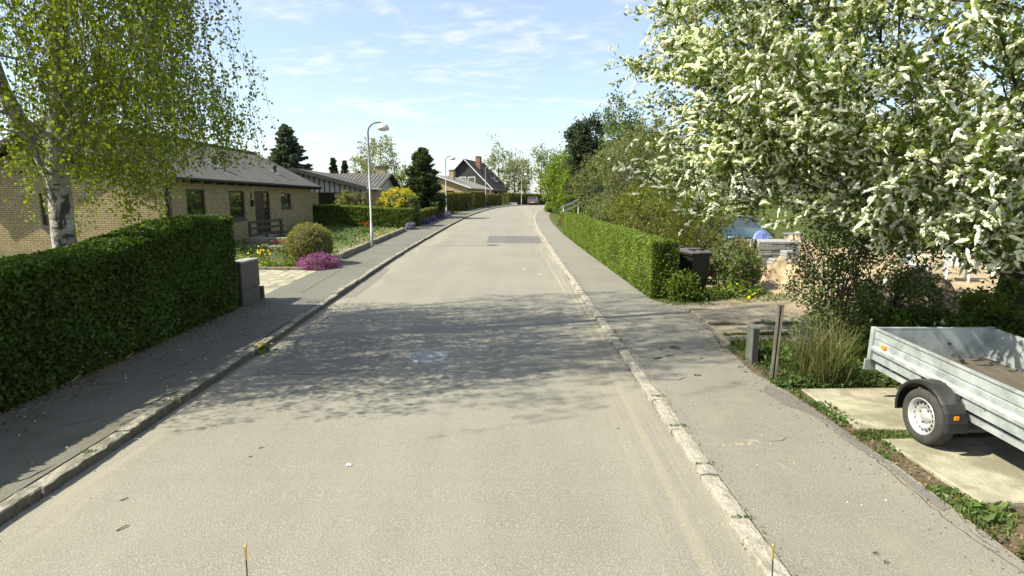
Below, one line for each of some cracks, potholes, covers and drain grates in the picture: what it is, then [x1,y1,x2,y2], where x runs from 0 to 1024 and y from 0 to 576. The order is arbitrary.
manhole cover [408,351,449,363]
